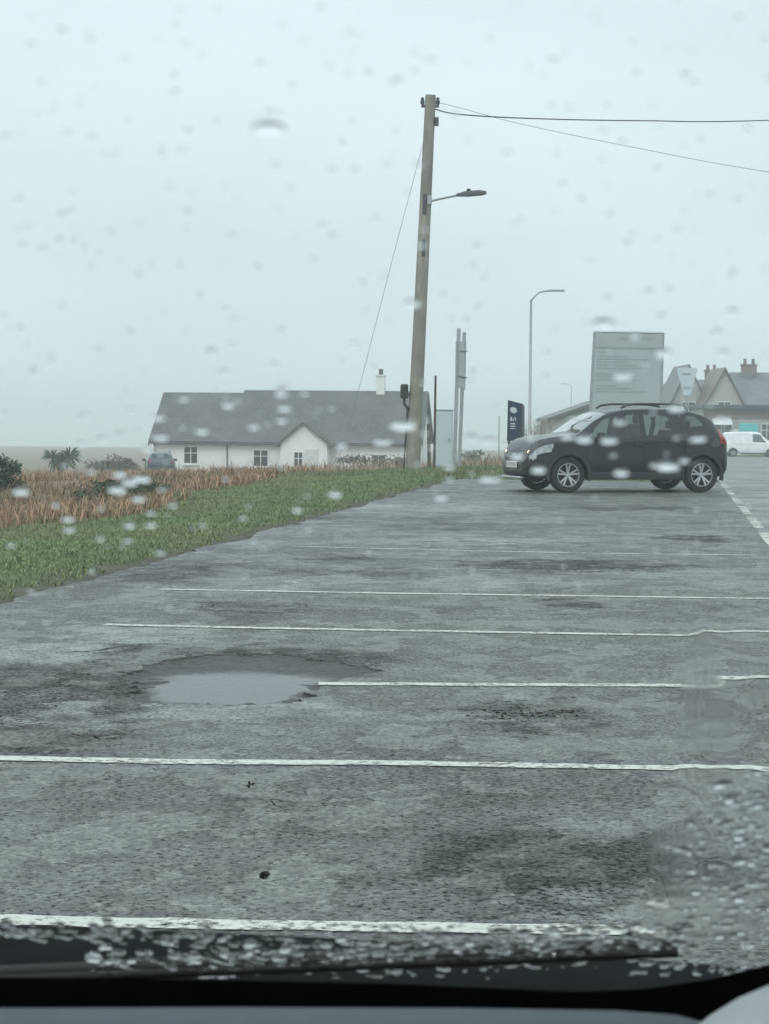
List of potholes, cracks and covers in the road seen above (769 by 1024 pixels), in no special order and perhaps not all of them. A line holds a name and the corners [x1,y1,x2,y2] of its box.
pothole [119,653,385,706]
